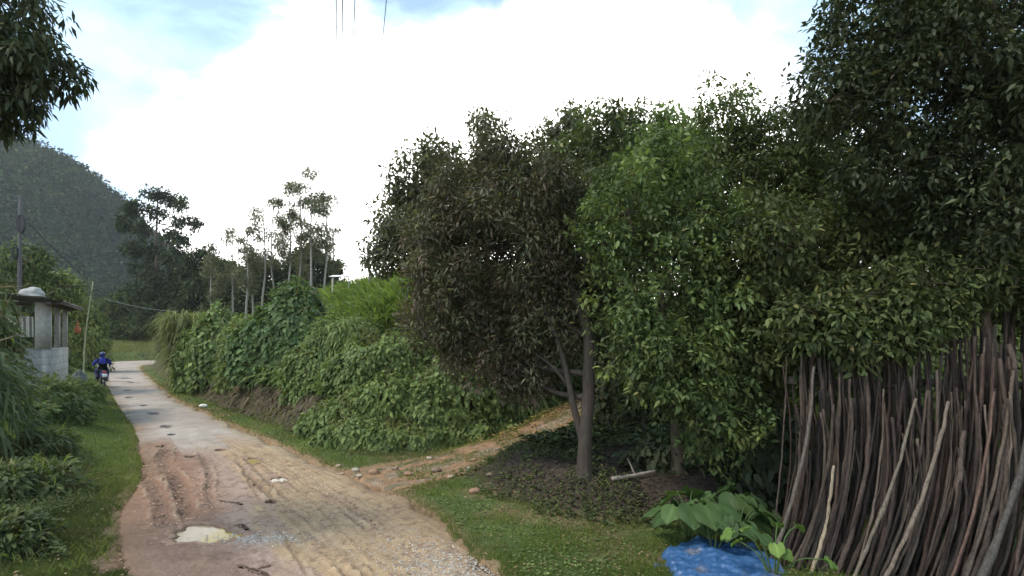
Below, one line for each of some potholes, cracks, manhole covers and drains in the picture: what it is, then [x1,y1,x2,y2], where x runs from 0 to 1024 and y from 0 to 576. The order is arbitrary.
pothole [160,521,255,546]
